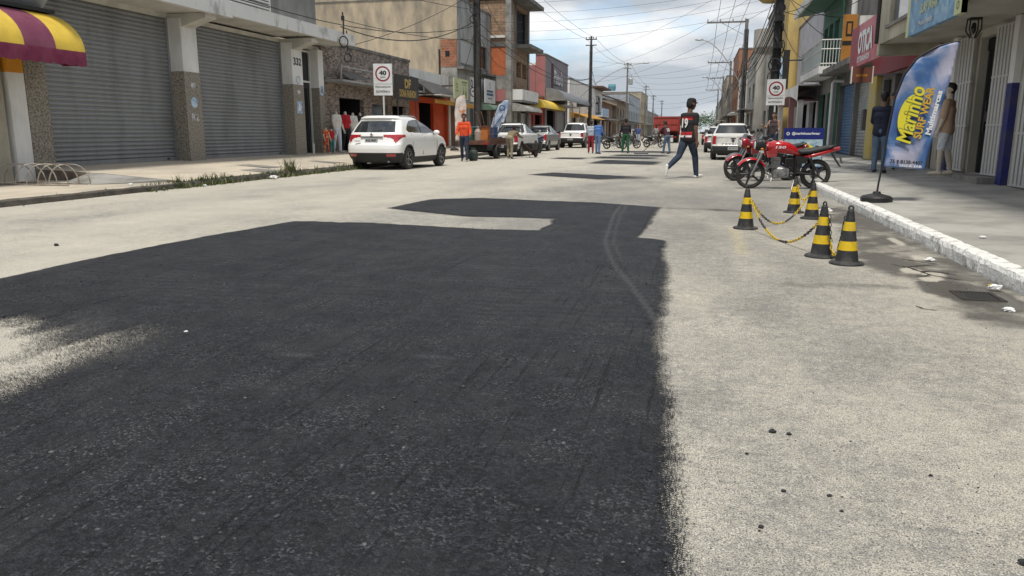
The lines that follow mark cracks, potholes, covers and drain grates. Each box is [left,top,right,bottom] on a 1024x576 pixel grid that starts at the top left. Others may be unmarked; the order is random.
drain grate [949,290,1008,302]
crack [893,259,959,280]
